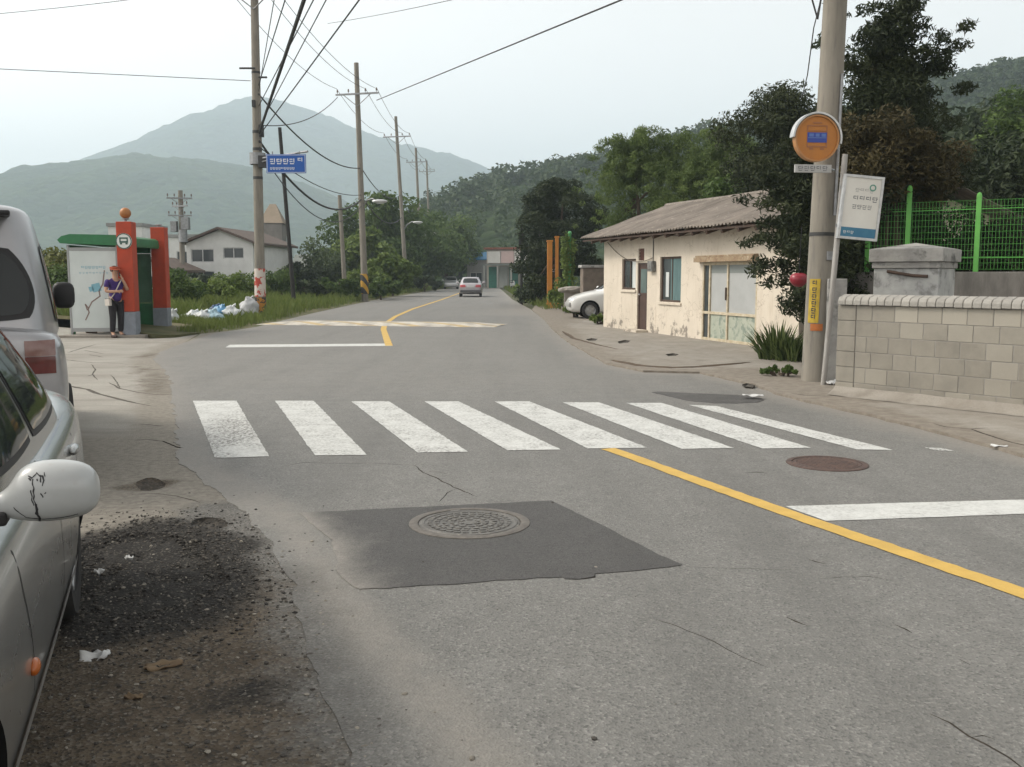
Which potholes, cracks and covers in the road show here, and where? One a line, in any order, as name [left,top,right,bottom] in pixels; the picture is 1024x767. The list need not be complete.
manhole cover [409,508,530,539]
pothole [136,478,166,491]
pothole [191,517,228,531]
crack [931,714,1022,767]
crack [68,345,172,406]
manhole cover [786,455,869,472]
pothole [80,532,231,615]
crack [287,462,477,502]
crack [653,618,766,667]
